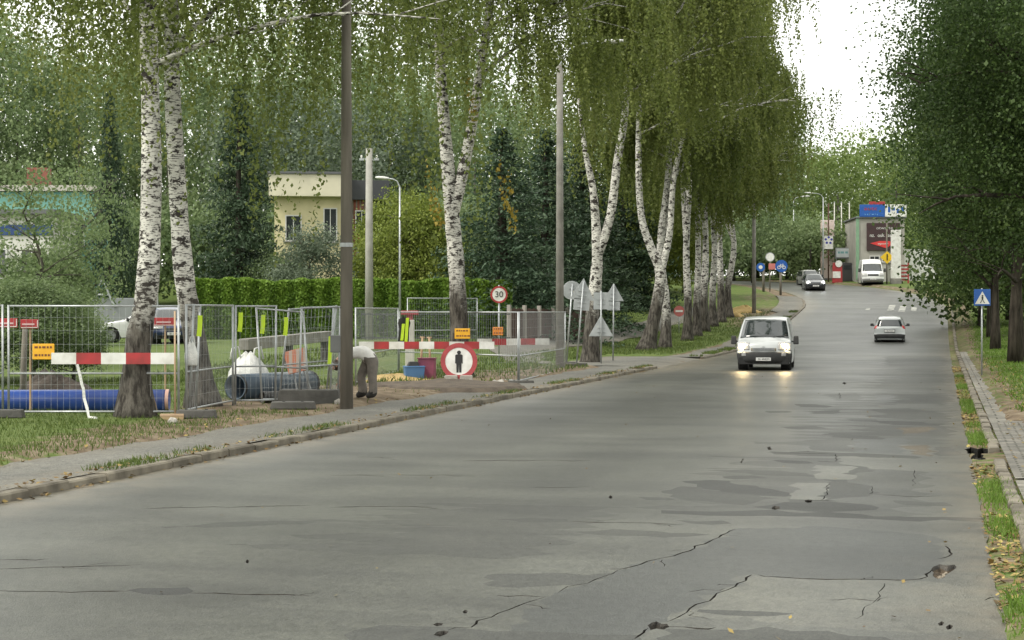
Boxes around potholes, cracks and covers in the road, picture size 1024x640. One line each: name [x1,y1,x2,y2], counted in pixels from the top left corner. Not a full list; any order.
crack [559,529,735,592]
crack [667,575,751,630]
crack [449,595,545,630]
pothole [931,564,956,579]
pothole [648,621,668,630]
crack [840,583,888,618]
crack [3,559,142,569]
